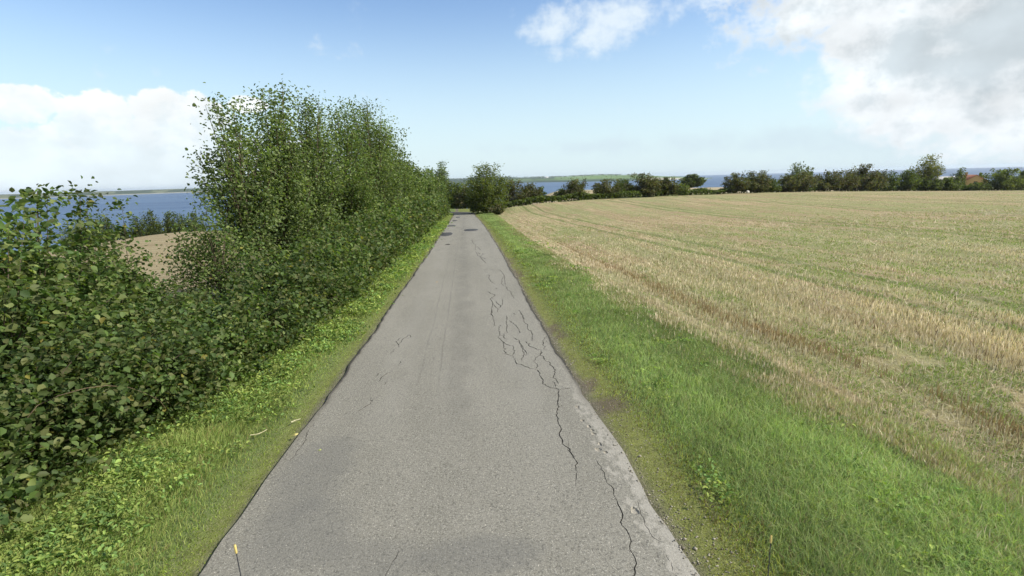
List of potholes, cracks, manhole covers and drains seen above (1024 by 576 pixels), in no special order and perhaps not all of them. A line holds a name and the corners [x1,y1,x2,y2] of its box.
crack [473,243,578,487]
crack [597,462,673,576]
